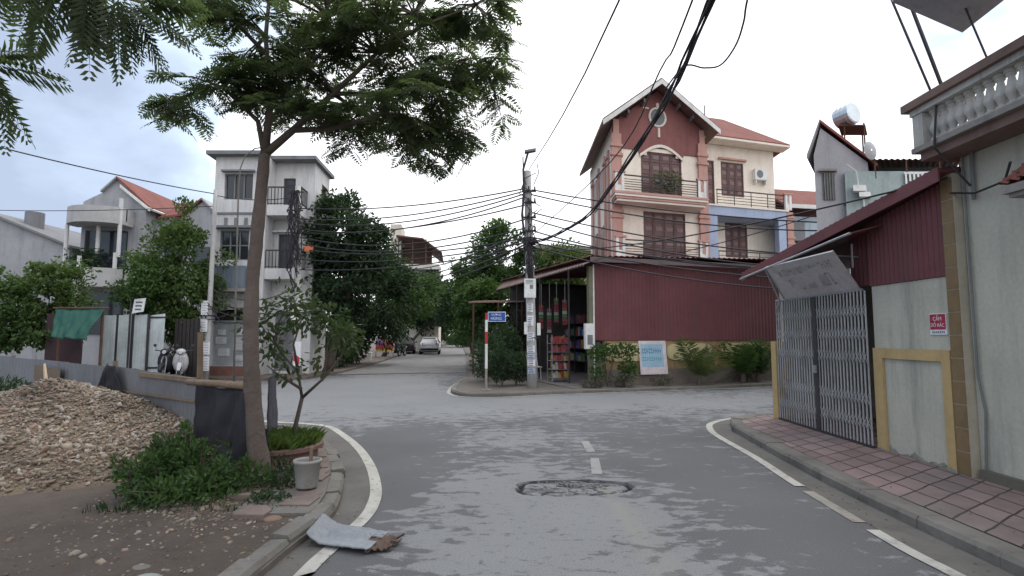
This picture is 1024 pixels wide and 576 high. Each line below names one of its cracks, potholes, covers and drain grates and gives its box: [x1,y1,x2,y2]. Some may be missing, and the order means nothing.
pothole [515,479,635,497]
